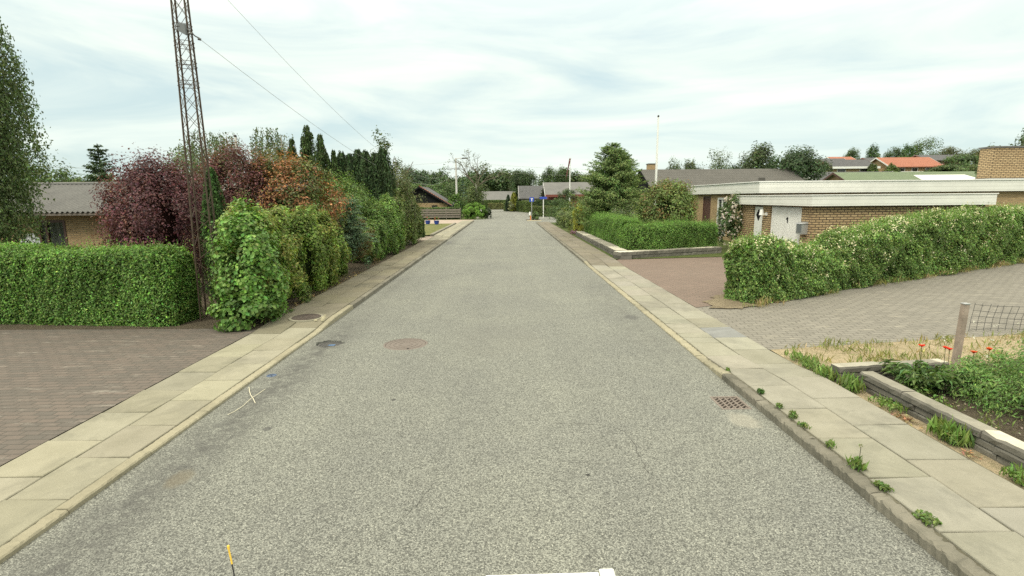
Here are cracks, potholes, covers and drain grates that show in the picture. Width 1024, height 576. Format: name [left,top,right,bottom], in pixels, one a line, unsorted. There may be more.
manhole cover [288,313,326,323]
manhole cover [383,338,428,350]
drain grate [710,396,752,410]
